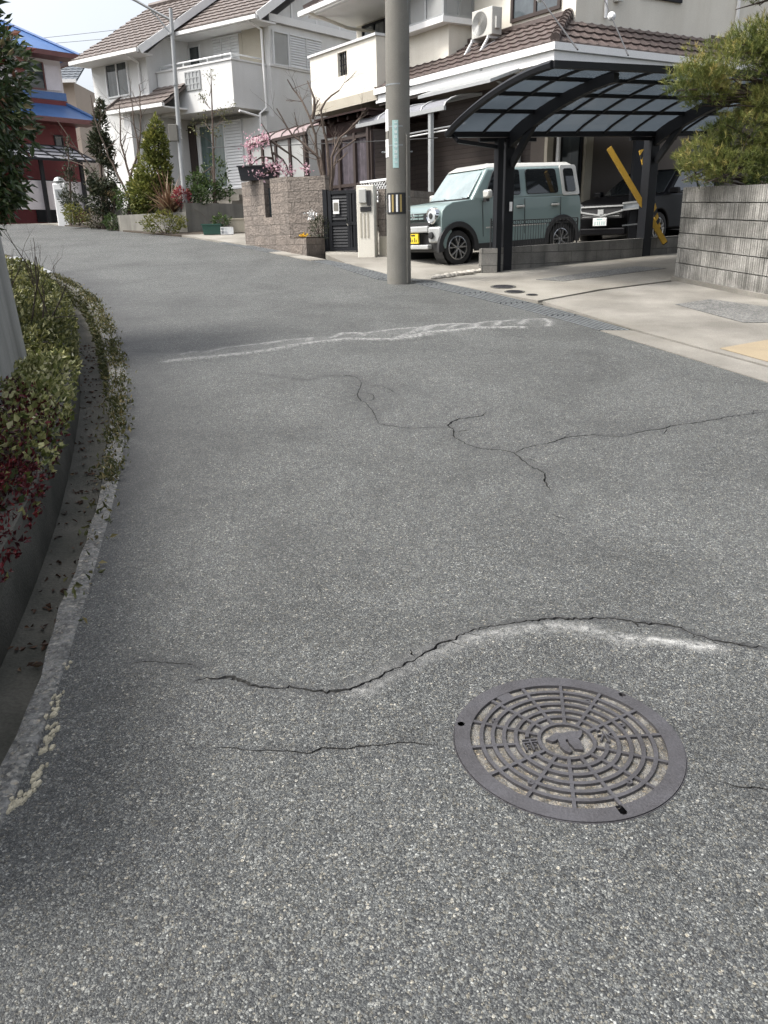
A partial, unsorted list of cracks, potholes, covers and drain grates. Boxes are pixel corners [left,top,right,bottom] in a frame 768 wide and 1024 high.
drain grate [460,292,528,304]
drain grate [547,315,628,331]
crack [215,742,426,754]
drain grate [335,265,373,273]
manhole cover [453,677,688,824]
drain grate [355,271,387,280]
drain grate [423,284,486,294]
drain grate [501,302,575,316]
crack [264,374,763,489]
crack [132,617,762,694]
